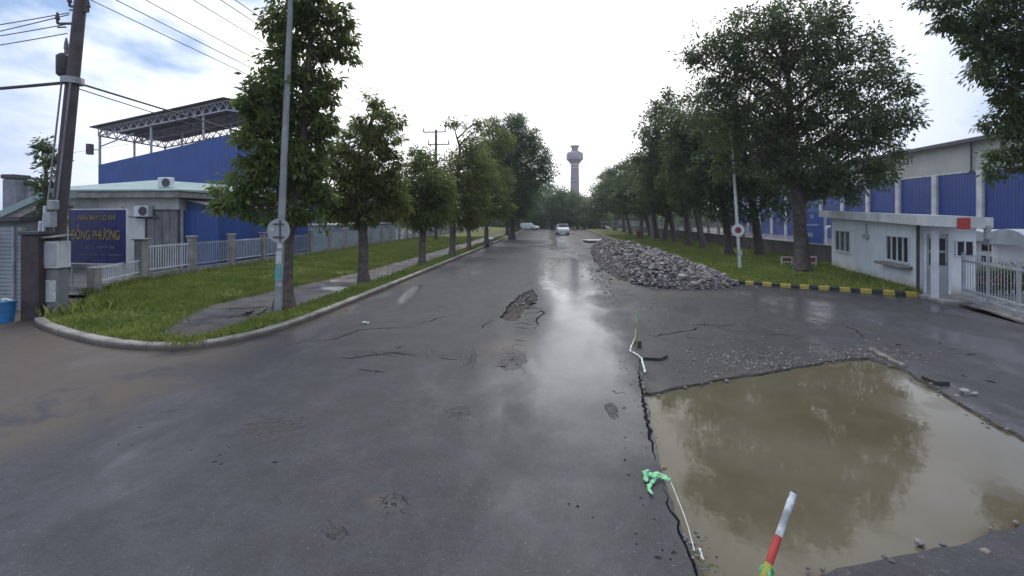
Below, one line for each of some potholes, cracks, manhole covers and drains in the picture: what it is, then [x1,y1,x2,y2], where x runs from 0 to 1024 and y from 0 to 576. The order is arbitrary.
pothole [321,520,353,542]
crack [662,487,699,576]
pothole [494,285,541,335]
crack [513,303,545,346]
pothole [645,356,1024,576]
crack [612,366,664,465]
pothole [377,490,417,513]
crack [308,327,399,342]
crack [654,324,746,338]
pothole [488,349,528,373]
